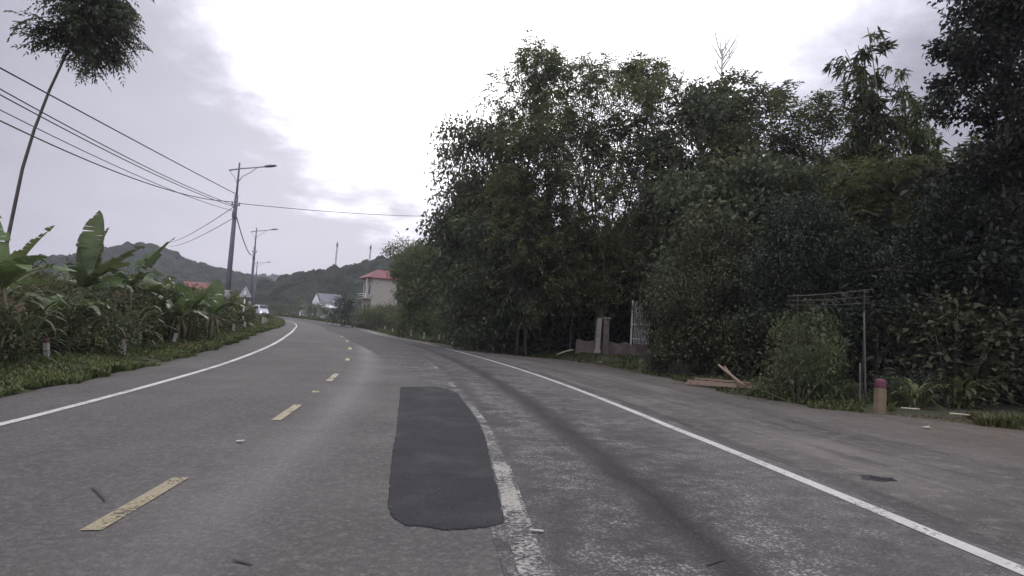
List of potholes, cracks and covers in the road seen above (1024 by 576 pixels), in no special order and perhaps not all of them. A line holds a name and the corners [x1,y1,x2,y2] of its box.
pothole [859,474,898,482]
